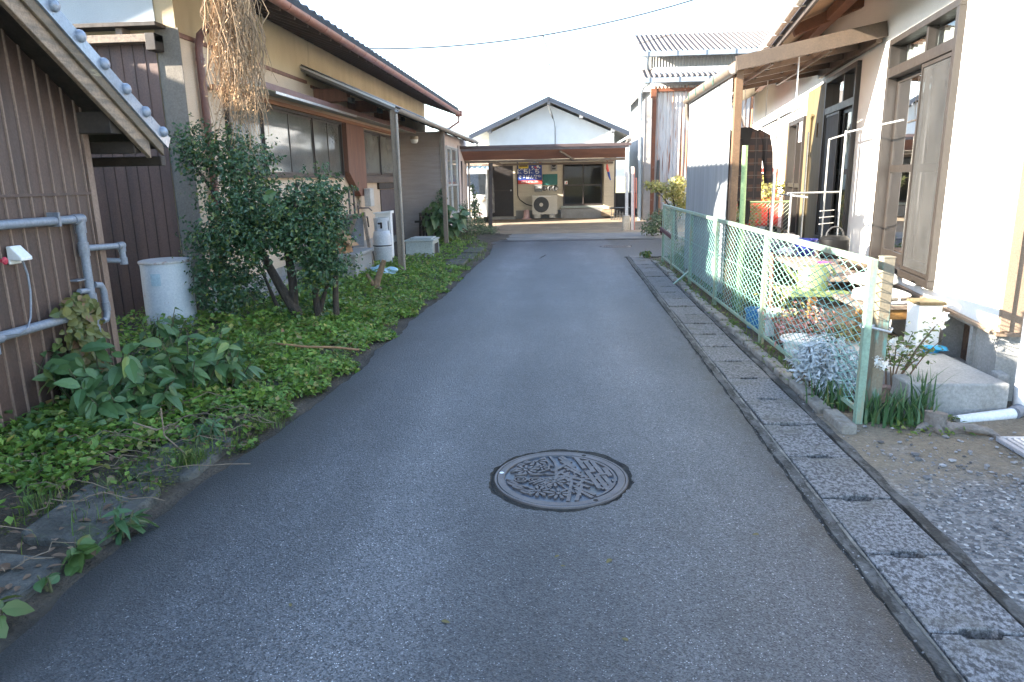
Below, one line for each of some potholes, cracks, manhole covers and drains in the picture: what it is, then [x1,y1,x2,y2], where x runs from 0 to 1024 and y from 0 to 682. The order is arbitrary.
manhole cover [488,449,635,513]
